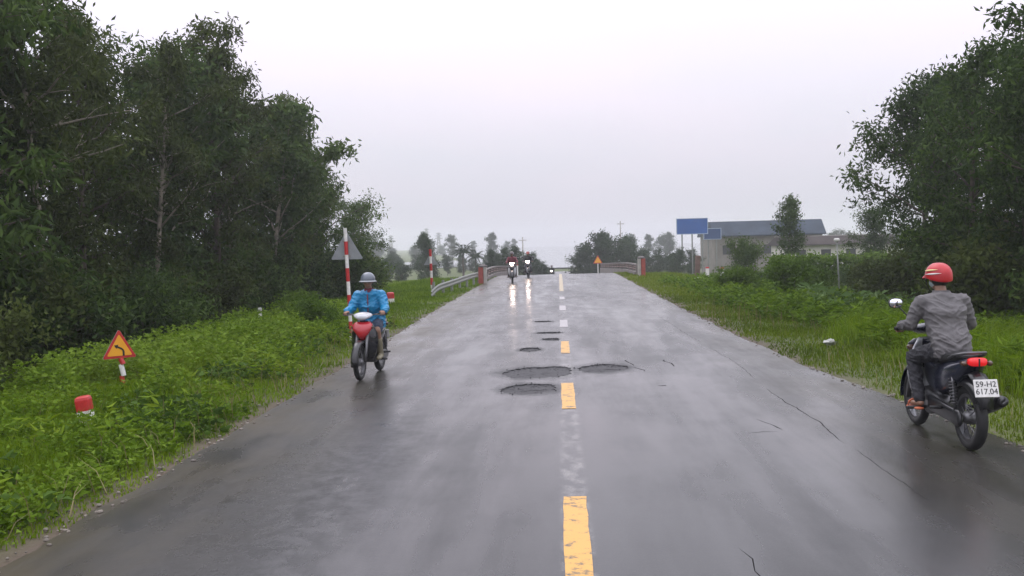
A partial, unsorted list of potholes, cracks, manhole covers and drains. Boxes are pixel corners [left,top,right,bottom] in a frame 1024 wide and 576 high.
pothole [500,382,557,395]
pothole [502,365,575,378]
crack [660,317,928,500]
pothole [574,364,628,373]
